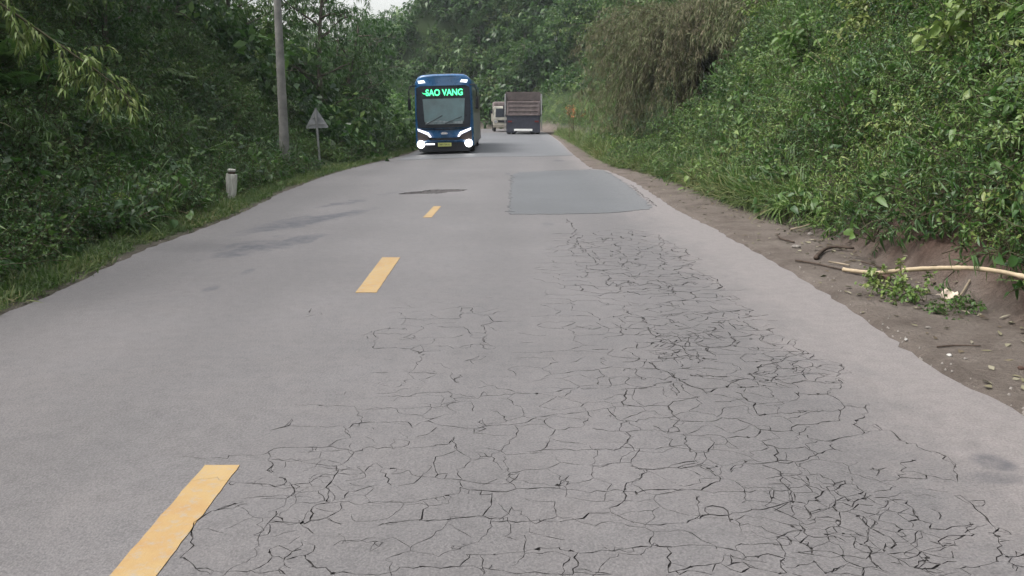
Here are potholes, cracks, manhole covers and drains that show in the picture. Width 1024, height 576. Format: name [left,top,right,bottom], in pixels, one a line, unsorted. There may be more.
crack [539,220,703,274]
crack [430,272,844,378]
crack [177,305,471,575]
crack [410,372,1023,576]
